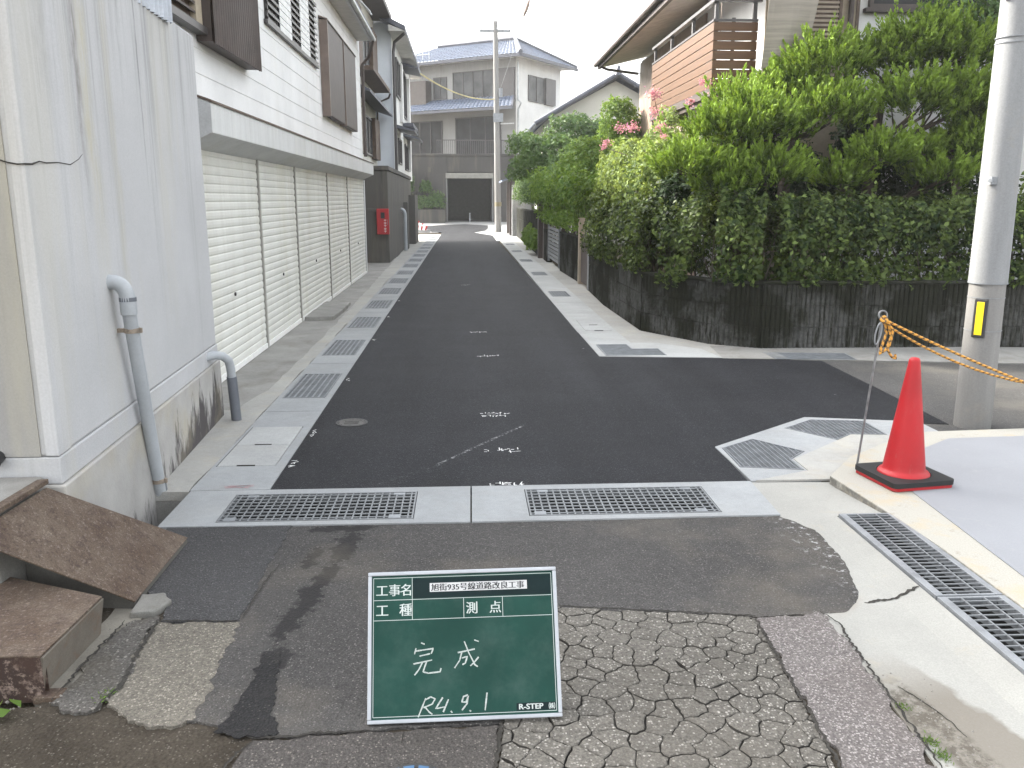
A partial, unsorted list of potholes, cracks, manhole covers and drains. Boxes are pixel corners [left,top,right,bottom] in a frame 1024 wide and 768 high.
drain grate [525,486,721,516]
drain grate [322,340,365,355]
drain grate [838,513,1002,601]
crack [492,605,967,768]
drain grate [216,491,417,523]
drain grate [937,595,1024,675]
drain grate [722,439,804,470]
drain grate [283,373,342,398]
drain grate [785,419,887,440]
drain grate [596,344,666,356]
manhole cover [336,418,368,427]
drain grate [347,317,382,328]
